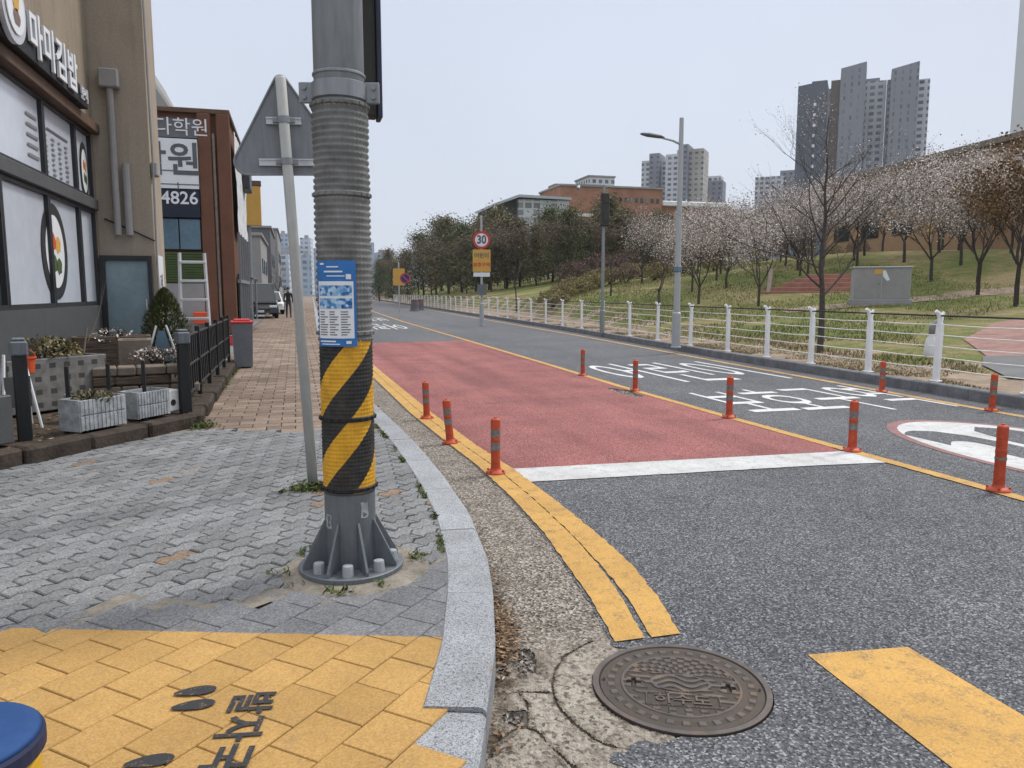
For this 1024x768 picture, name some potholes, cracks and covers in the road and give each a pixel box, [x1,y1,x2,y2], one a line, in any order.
manhole cover [593,644,773,738]
crack [487,642,616,768]
